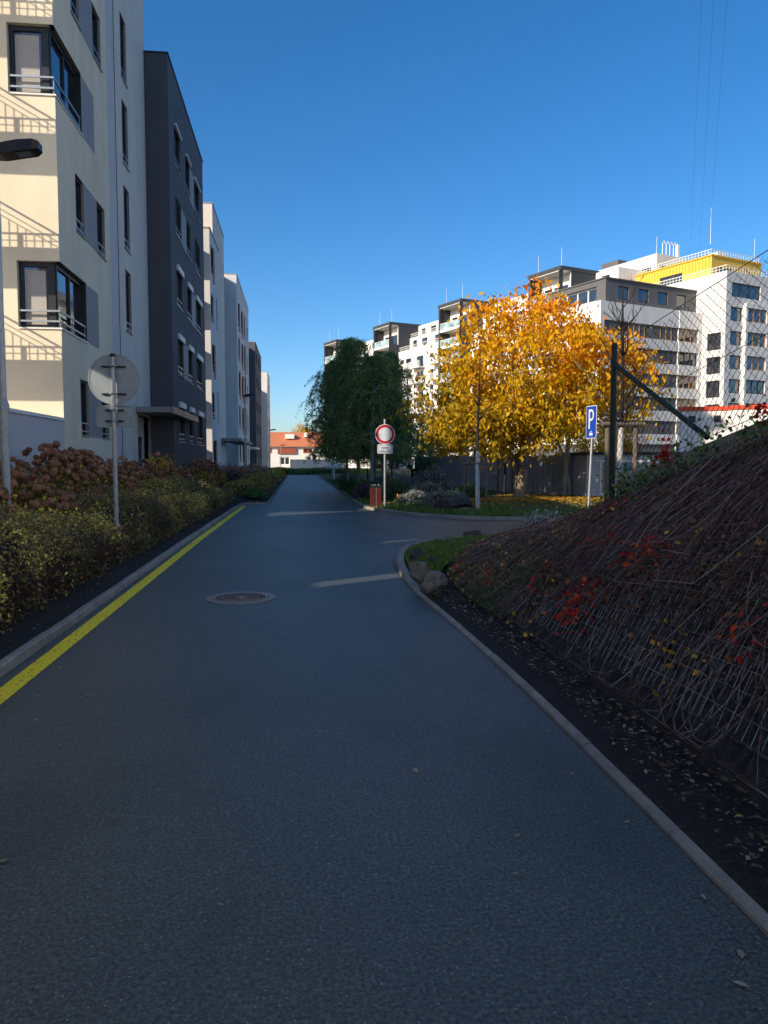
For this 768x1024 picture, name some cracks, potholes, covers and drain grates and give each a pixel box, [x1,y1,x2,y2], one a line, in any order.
manhole cover [206,592,275,605]
